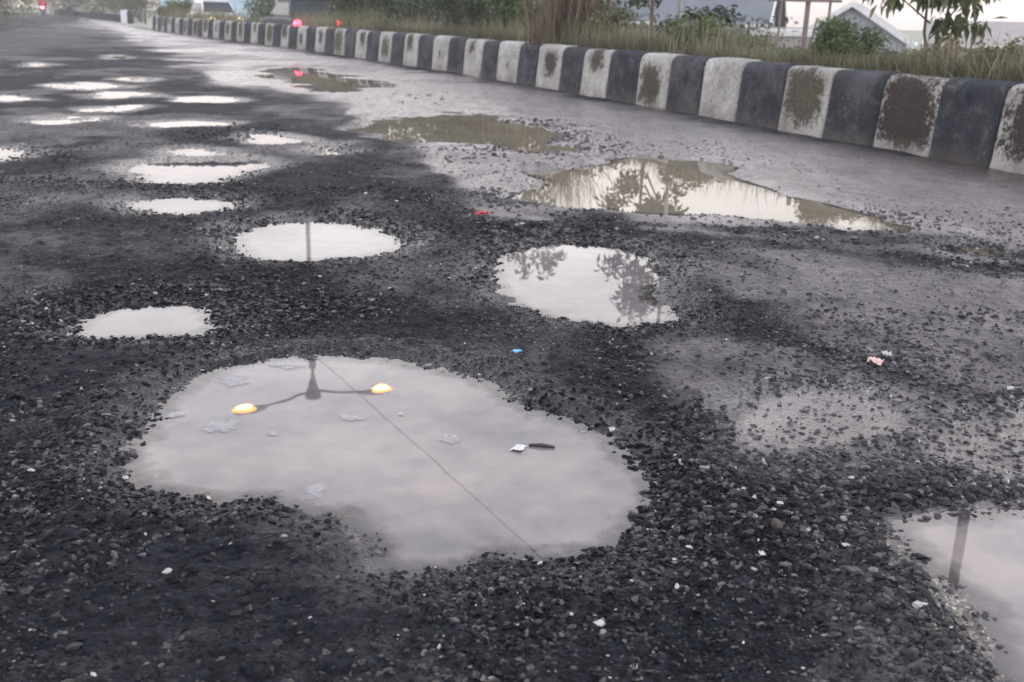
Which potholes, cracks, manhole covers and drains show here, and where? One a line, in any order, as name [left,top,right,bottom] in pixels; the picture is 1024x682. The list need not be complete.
pothole [0,142,66,163]
pothole [210,130,374,156]
pothole [227,66,414,94]
pothole [84,188,269,217]
pothole [467,150,965,238]
pothole [161,95,264,104]
pothole [824,474,1024,682]
pothole [38,335,732,616]
pothole [440,228,735,338]
pothole [910,388,1024,479]
pothole [189,208,444,266]
